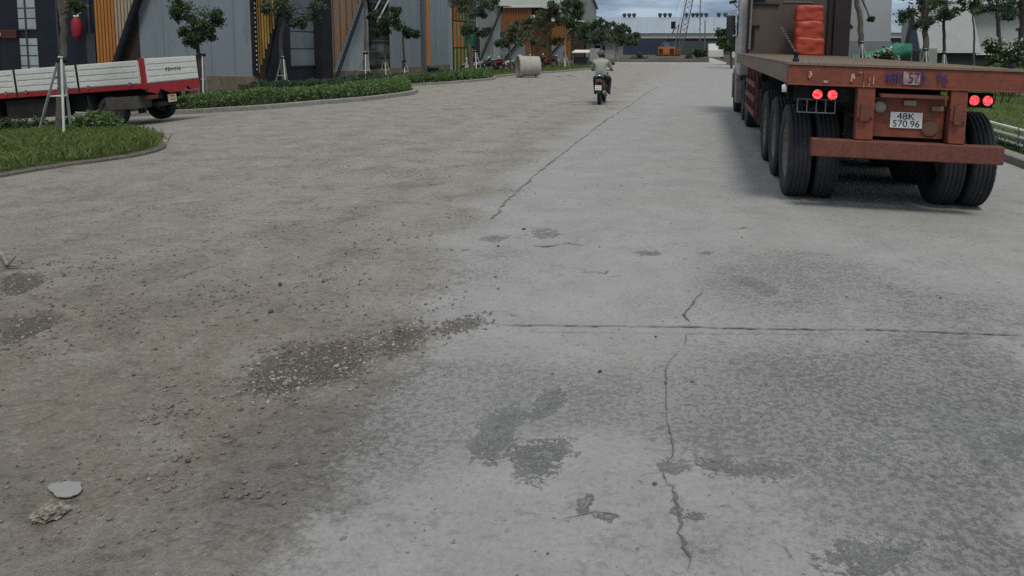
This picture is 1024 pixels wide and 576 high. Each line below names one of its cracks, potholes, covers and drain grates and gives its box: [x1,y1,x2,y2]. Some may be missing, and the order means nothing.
pothole [0,307,79,349]
crack [637,290,722,569]
